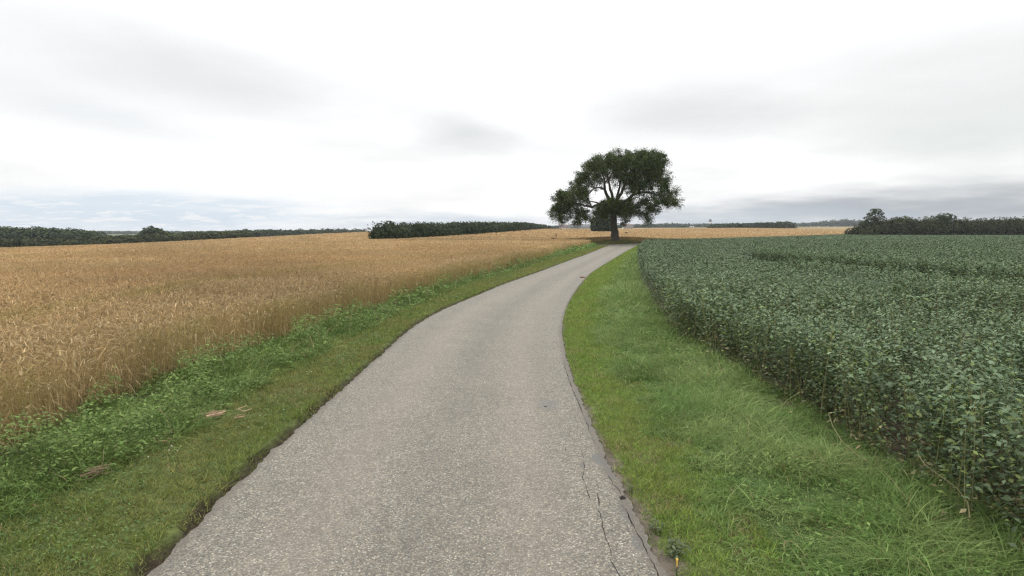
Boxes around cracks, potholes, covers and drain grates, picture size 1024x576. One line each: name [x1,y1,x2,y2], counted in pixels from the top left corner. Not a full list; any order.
crack [563,360,659,576]
